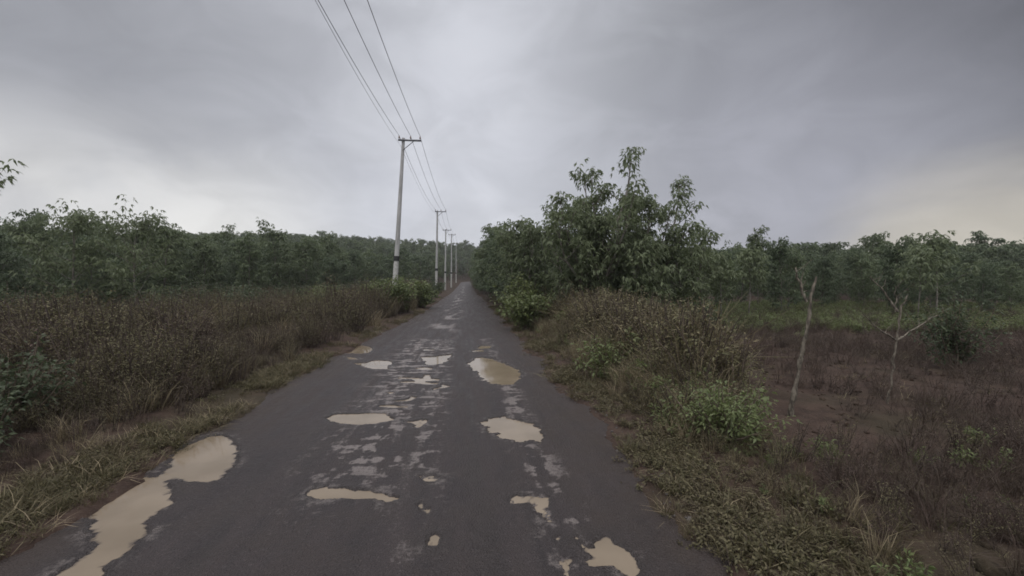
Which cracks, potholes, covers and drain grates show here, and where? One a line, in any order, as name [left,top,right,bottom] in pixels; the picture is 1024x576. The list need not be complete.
pothole [297,482,407,504]
pothole [40,432,247,576]
pothole [465,356,526,385]
pothole [417,353,455,366]
pothole [475,414,552,444]
pothole [319,411,401,426]
pothole [566,528,653,576]
pothole [350,359,395,370]
pothole [501,490,565,525]
pothole [346,345,376,354]
